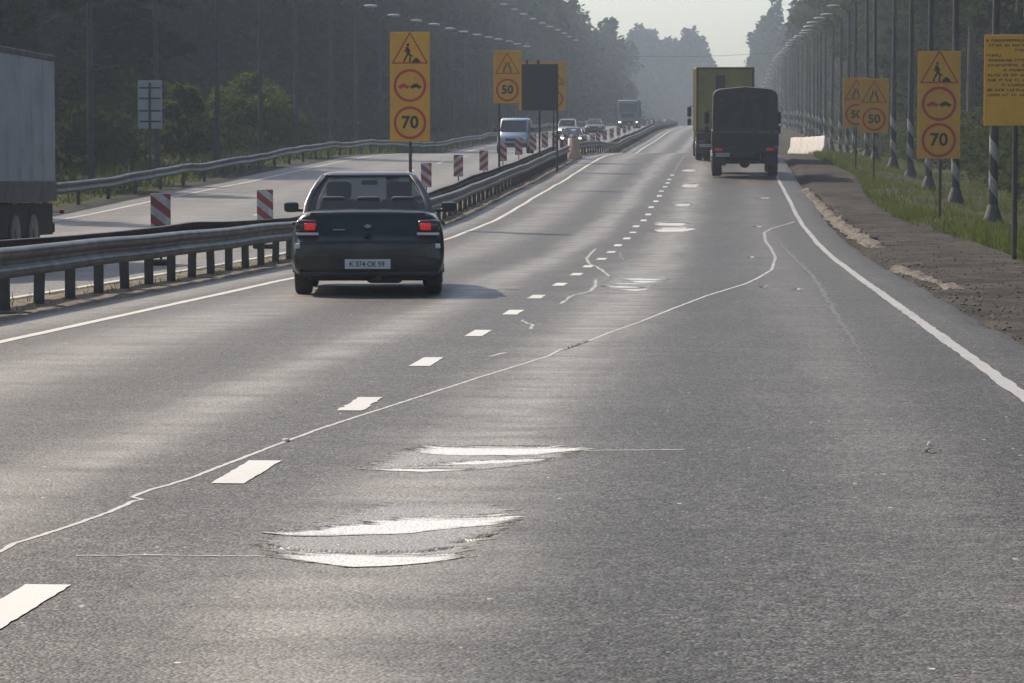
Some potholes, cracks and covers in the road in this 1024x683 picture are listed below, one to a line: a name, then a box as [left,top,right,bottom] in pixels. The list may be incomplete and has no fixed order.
crack [777,238,883,384]
pothole [598,275,669,291]
crack [559,249,625,304]
pothole [256,502,525,568]
pothole [349,444,595,472]
